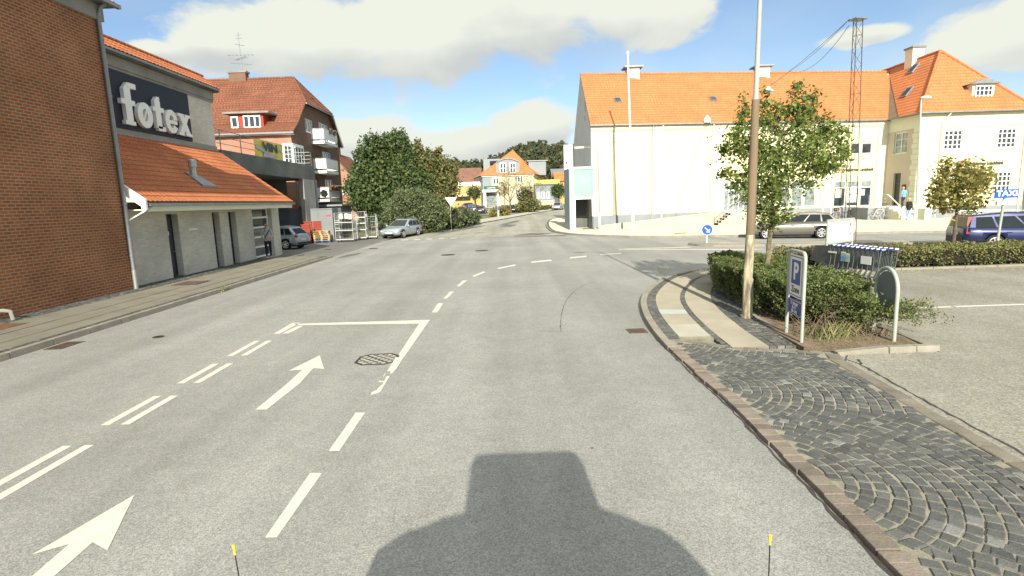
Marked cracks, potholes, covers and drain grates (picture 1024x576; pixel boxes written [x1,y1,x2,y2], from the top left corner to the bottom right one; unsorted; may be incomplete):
drain grate [43,341,85,350]
